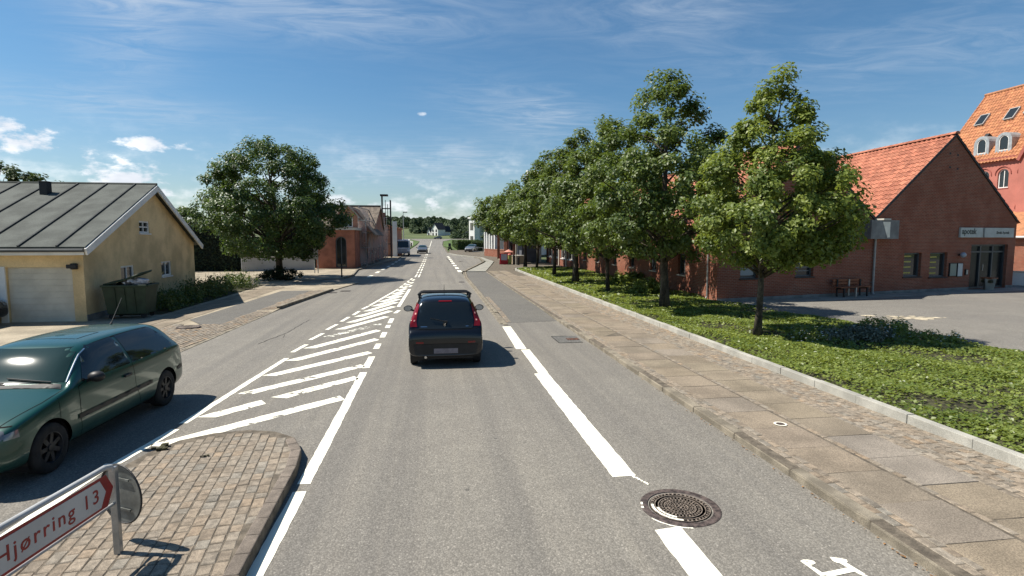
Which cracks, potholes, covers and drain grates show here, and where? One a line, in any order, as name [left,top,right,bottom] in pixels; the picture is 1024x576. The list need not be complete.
manhole cover [640,489,722,529]
